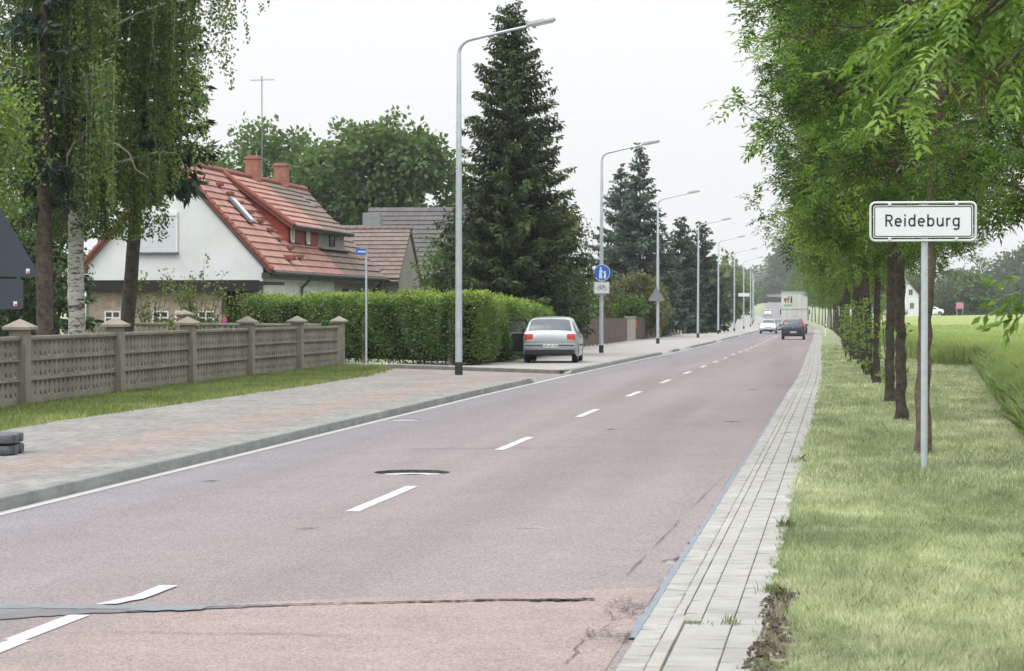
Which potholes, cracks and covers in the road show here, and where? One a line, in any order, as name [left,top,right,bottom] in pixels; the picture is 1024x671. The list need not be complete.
crack [245,594,651,663]
crack [627,476,724,574]
